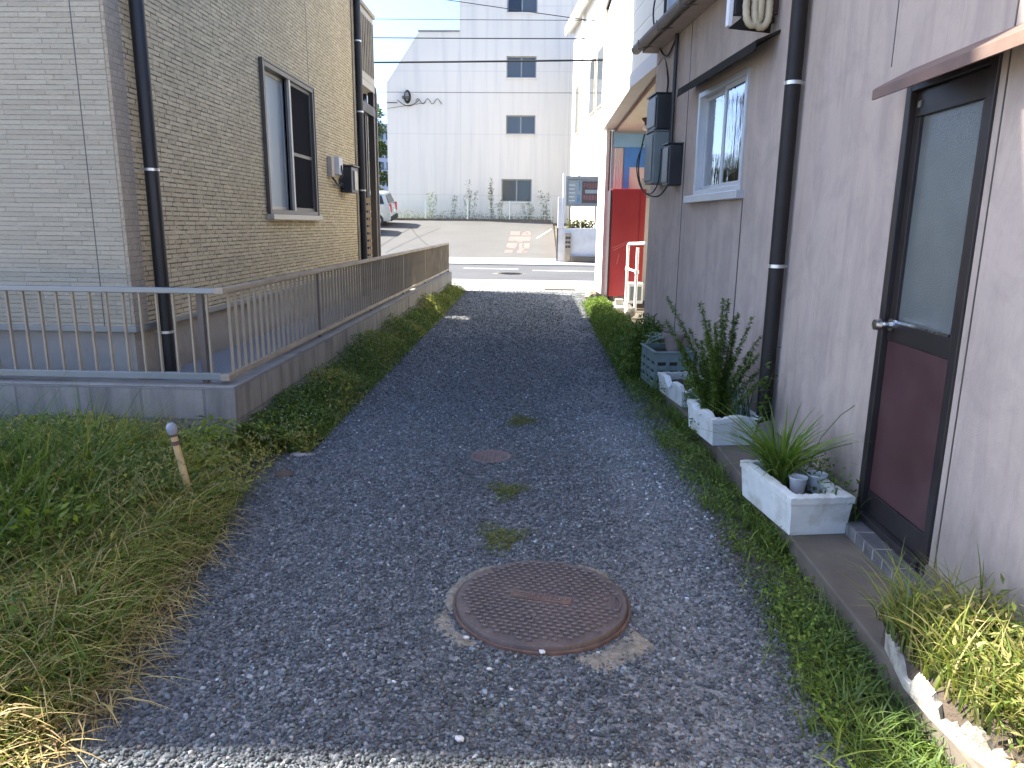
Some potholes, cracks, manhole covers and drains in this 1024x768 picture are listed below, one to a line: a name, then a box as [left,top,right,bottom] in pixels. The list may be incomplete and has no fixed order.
manhole cover [470,450,512,463]
manhole cover [433,560,655,671]
